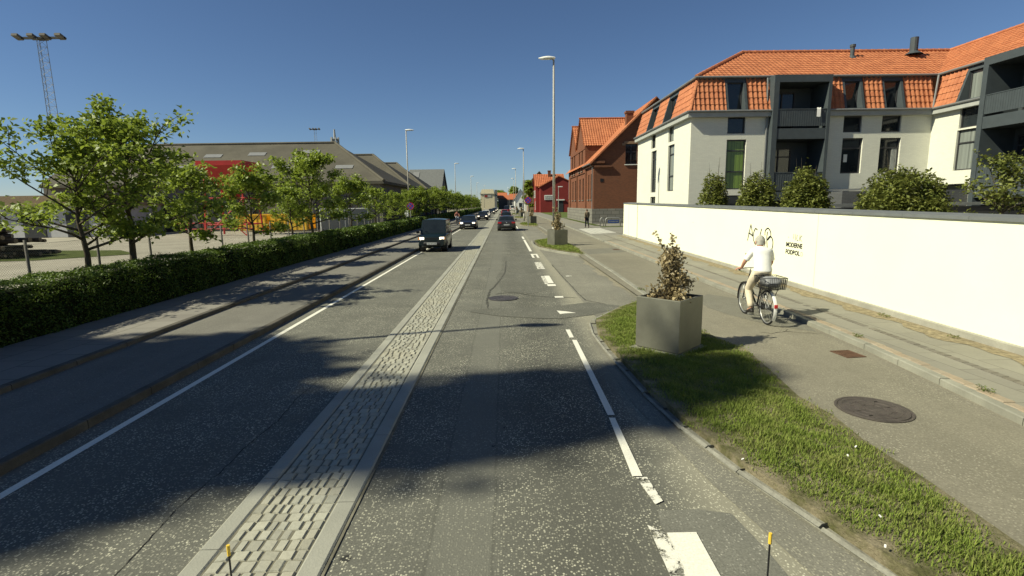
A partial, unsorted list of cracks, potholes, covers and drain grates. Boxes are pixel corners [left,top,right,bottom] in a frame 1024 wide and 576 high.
manhole cover [834,396,916,423]
drain grate [831,350,867,358]
